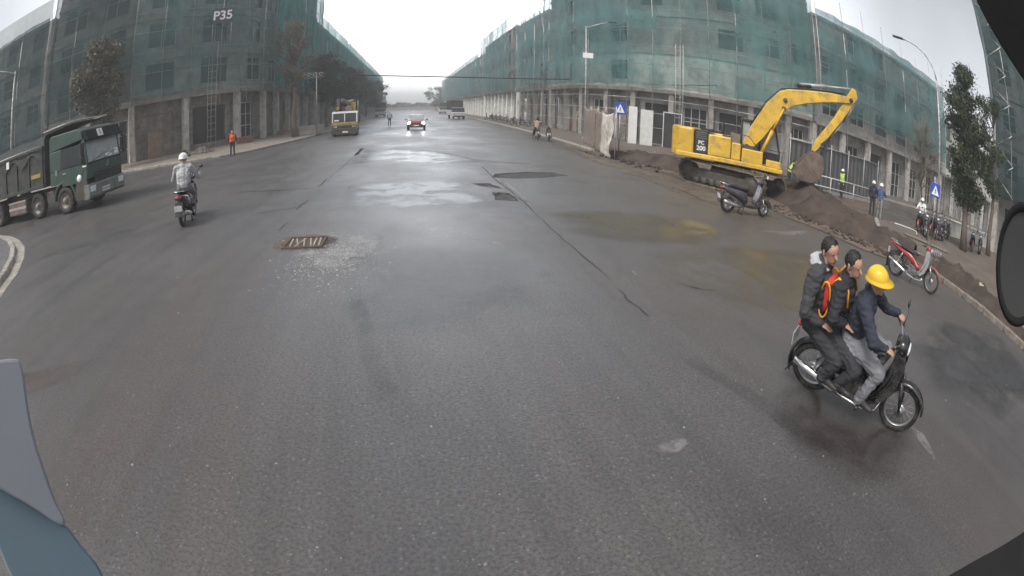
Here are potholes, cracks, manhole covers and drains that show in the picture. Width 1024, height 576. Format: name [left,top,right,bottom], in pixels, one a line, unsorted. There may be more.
crack [536,214,648,316]
pothole [492,192,518,201]
